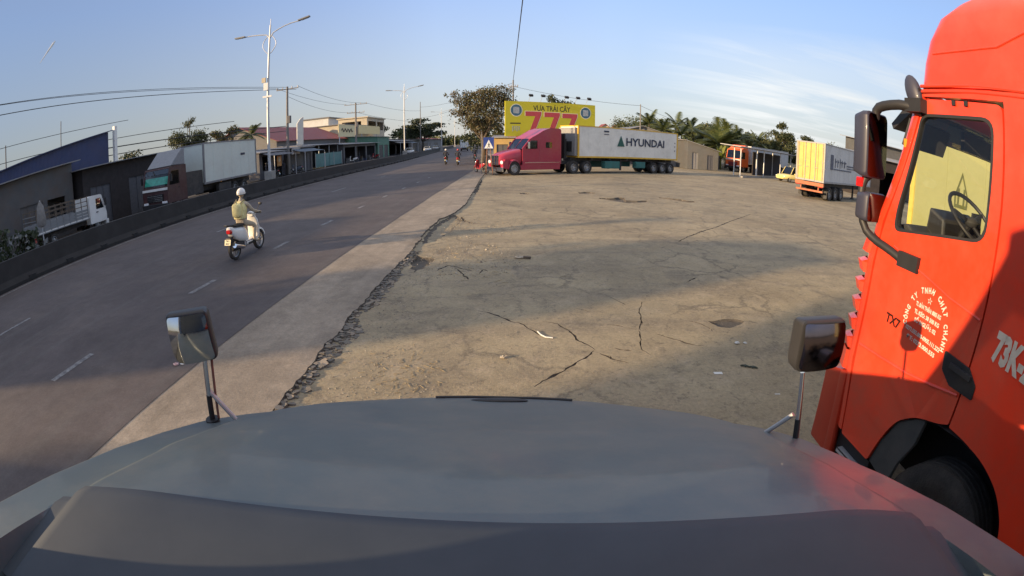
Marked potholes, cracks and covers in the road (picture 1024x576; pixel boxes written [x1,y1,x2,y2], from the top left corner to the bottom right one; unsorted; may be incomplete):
pothole [709,319,744,328]
crack [274,250,487,411]
crack [481,297,709,387]
